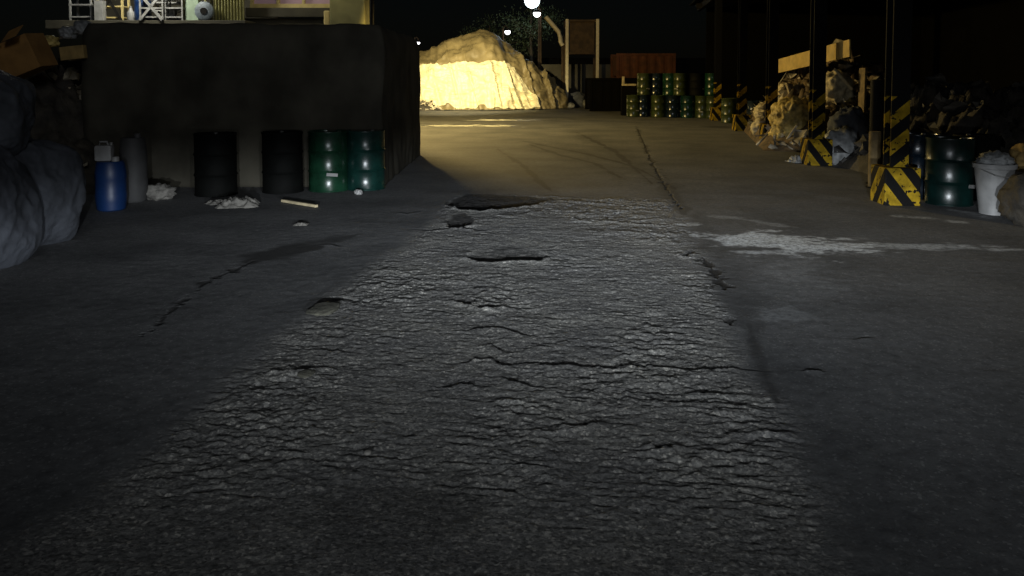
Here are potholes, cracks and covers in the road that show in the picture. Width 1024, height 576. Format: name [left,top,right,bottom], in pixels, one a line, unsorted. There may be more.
pothole [465,245,549,262]
pothole [445,213,475,228]
crack [716,314,738,326]
crack [436,327,758,388]
crack [137,260,256,337]
crack [694,257,736,290]
pothole [446,193,550,211]
